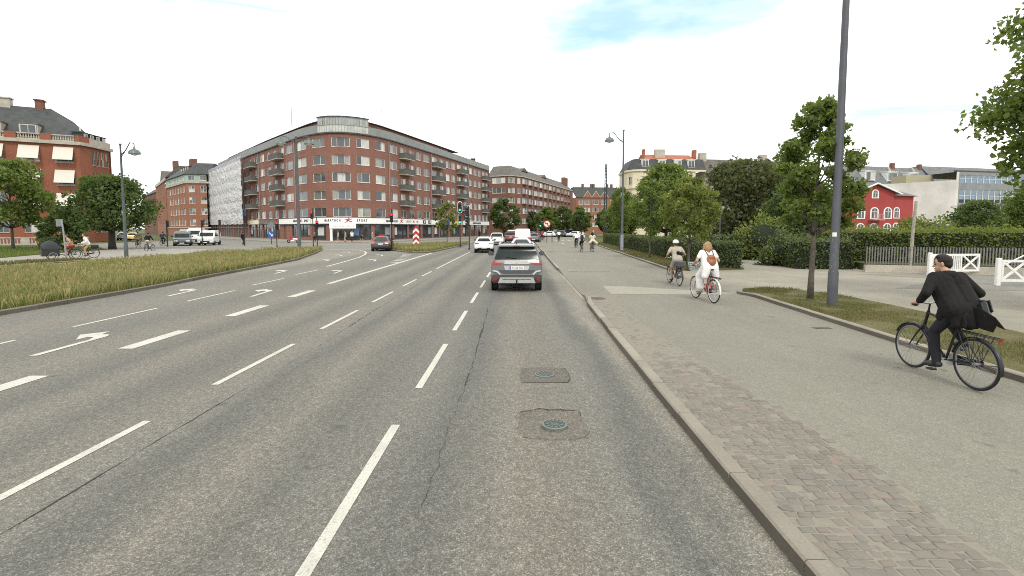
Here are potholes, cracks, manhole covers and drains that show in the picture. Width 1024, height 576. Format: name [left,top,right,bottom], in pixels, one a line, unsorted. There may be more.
manhole cover [542,419,567,432]
crack [458,310,488,400]
